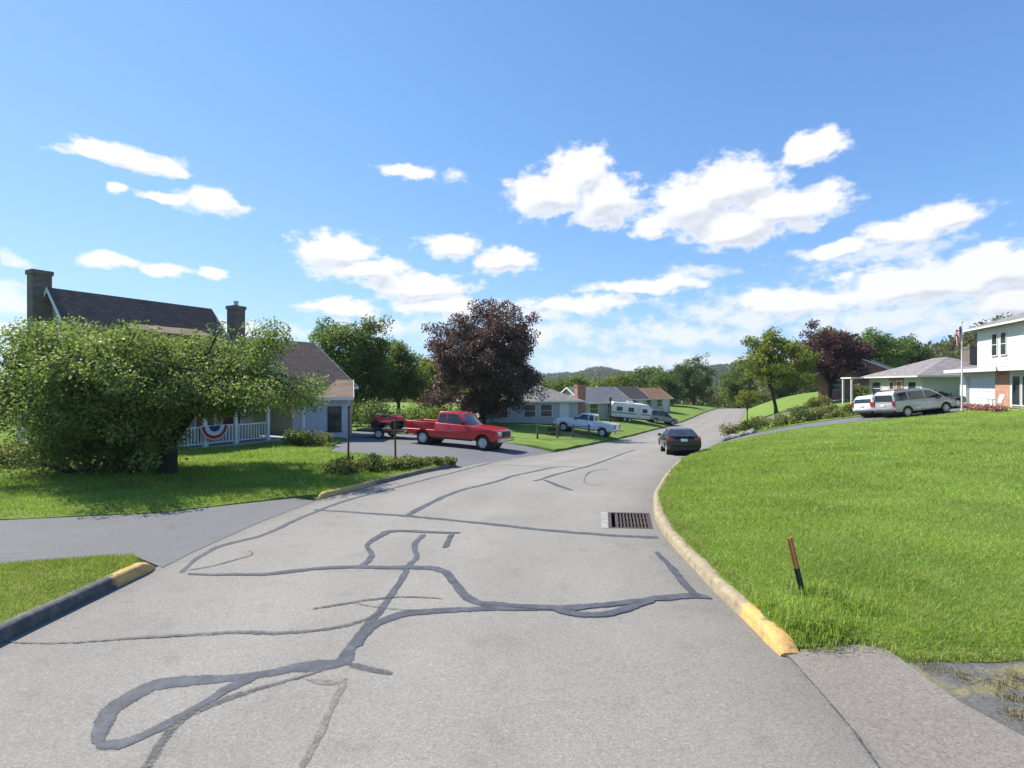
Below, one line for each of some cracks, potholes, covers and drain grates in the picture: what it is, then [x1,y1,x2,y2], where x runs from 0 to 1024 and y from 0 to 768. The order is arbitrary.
drain grate [601,512,653,529]
